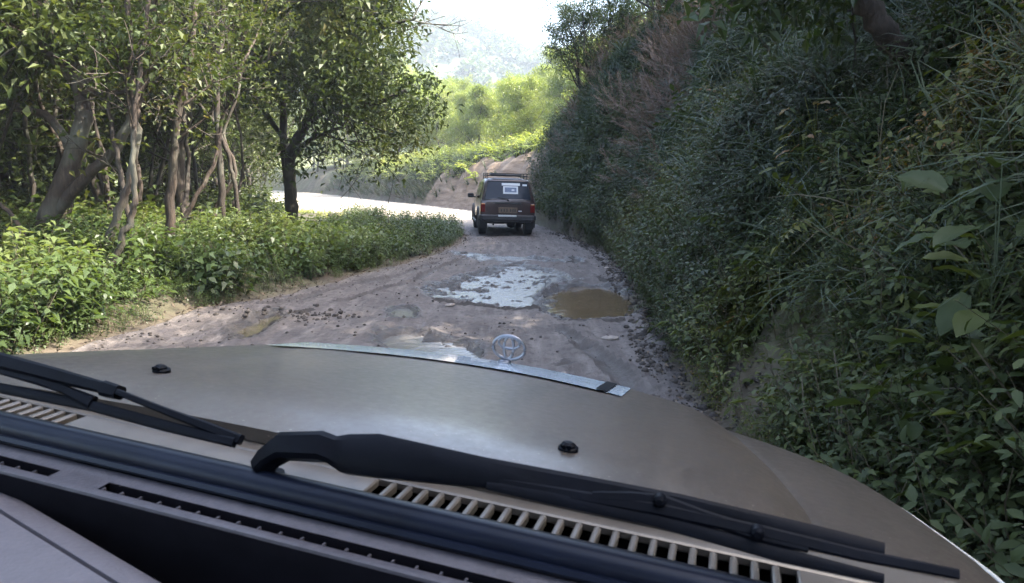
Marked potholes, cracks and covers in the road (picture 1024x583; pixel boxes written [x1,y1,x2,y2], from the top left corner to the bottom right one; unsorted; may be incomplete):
pothole [384,304,420,318]
pothole [420,261,575,309]
pothole [538,278,649,320]
